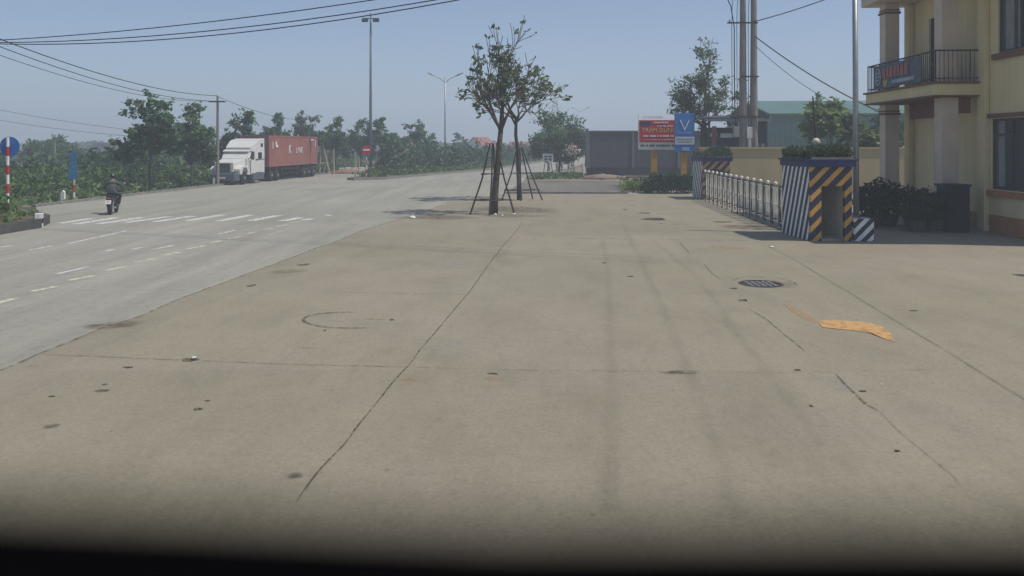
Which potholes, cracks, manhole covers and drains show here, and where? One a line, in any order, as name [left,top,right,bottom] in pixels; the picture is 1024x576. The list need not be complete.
manhole cover [738,280,784,288]
crack [836,374,956,479]
